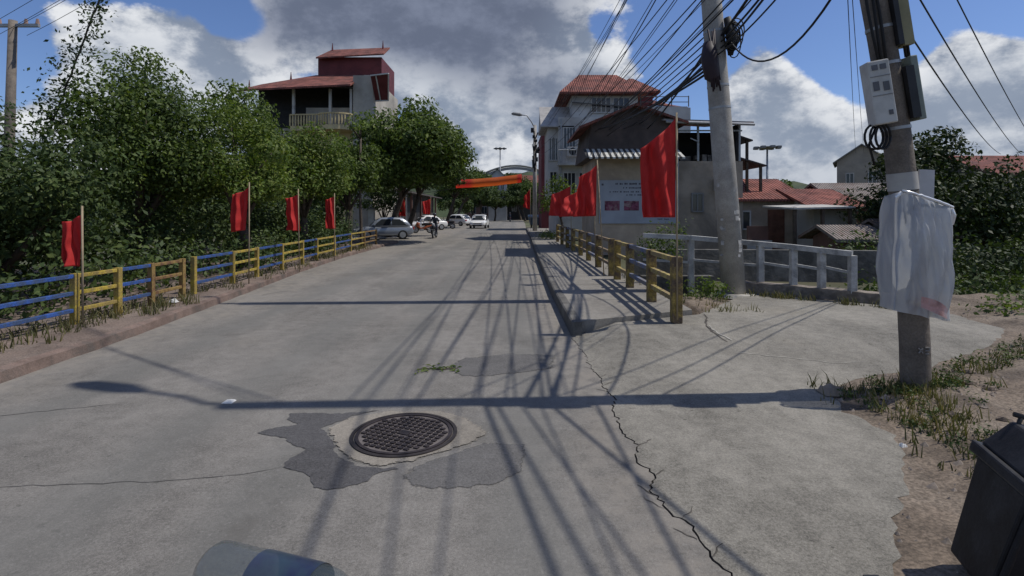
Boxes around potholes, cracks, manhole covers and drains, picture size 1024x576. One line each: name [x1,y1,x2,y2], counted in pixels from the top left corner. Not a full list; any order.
crack [5,467,279,487]
manhole cover [349,413,457,458]
crack [704,314,731,342]
crack [572,339,733,576]
